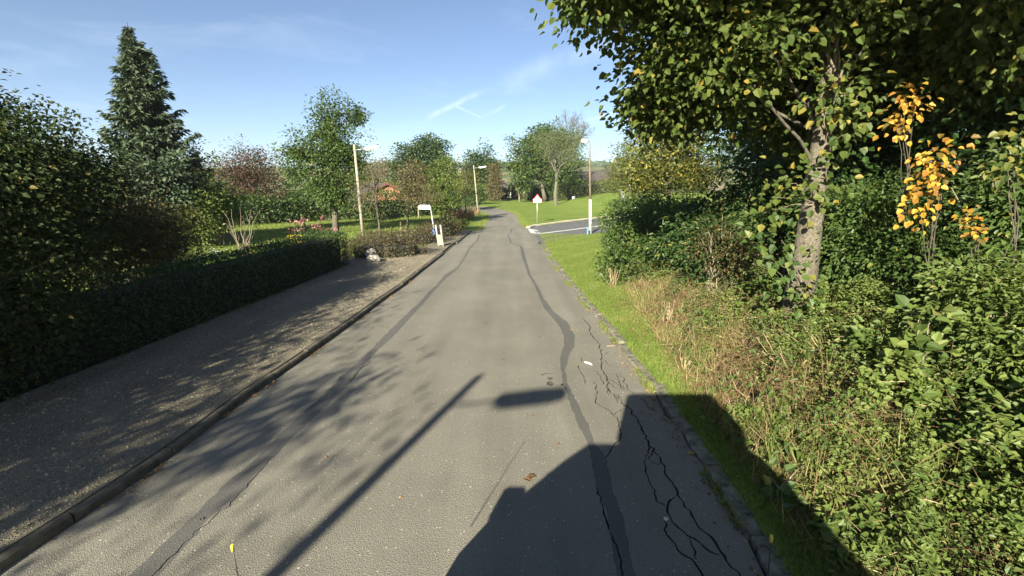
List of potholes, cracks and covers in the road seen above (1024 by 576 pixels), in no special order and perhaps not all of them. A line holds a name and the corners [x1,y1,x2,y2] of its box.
crack [578,320,741,576]
